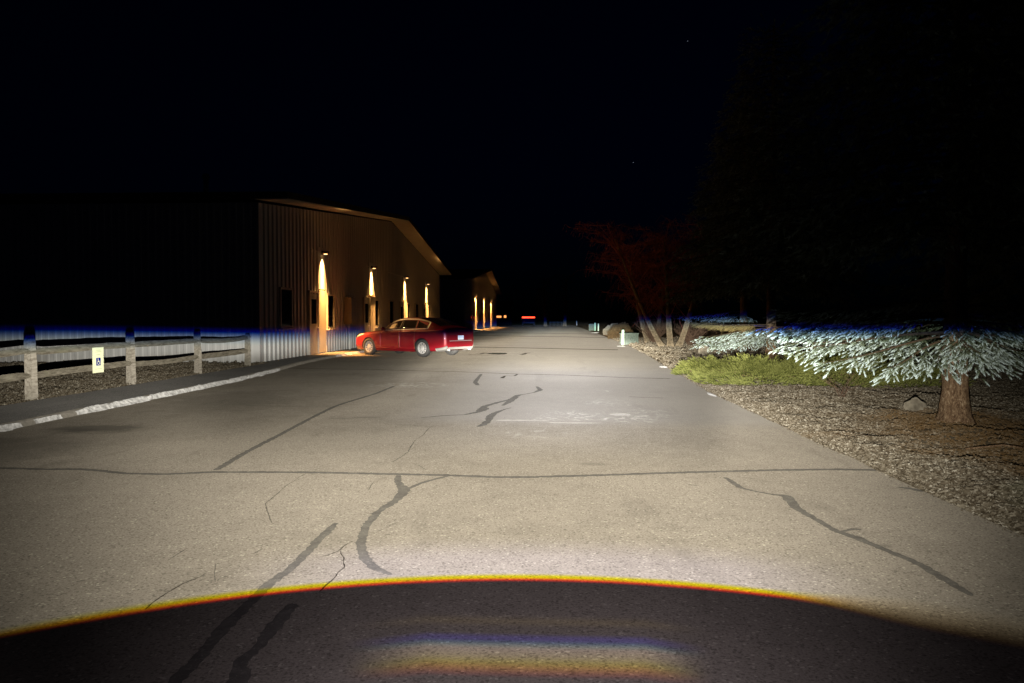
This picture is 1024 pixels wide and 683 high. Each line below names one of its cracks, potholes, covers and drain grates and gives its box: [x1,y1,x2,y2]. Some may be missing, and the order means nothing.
crack [146,564,216,609]
crack [265,474,305,525]
crack [320,544,347,591]
